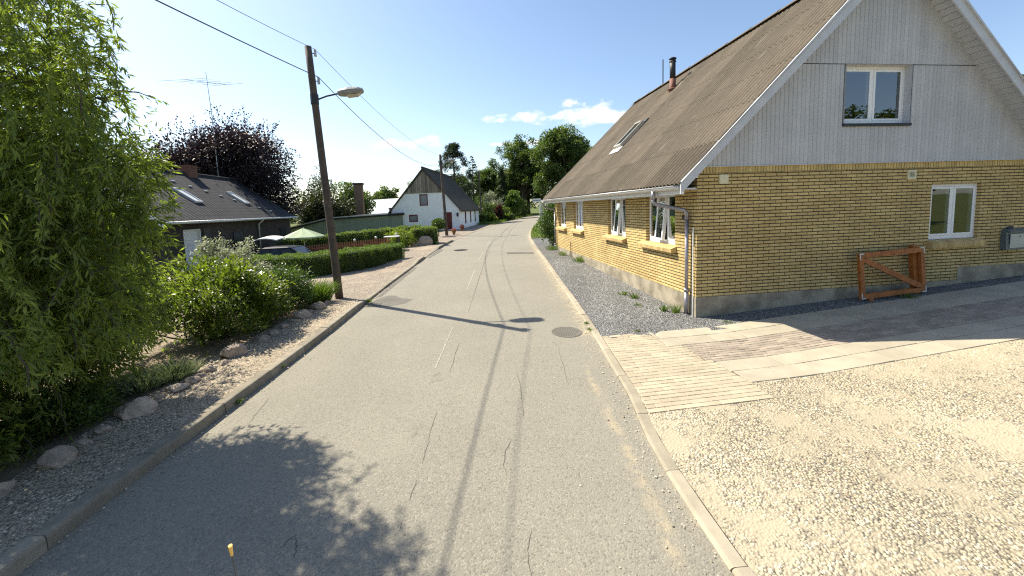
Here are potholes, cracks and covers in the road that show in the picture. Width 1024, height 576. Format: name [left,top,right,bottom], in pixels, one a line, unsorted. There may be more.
manhole cover [551,327,582,338]
